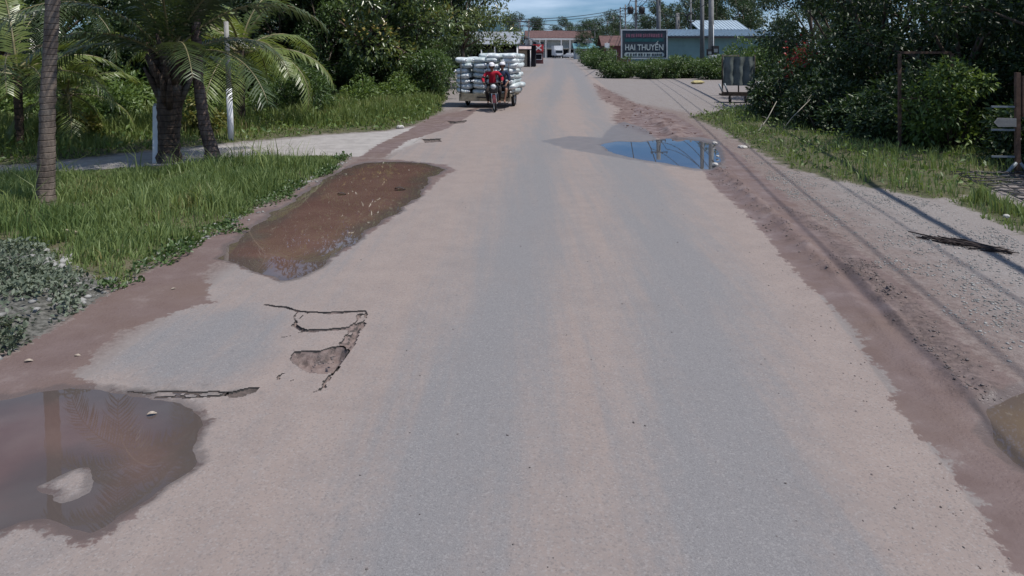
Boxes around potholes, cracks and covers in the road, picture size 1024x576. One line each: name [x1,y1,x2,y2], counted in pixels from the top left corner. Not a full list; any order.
crack [127,391,229,399]
pothole [290,346,350,375]
